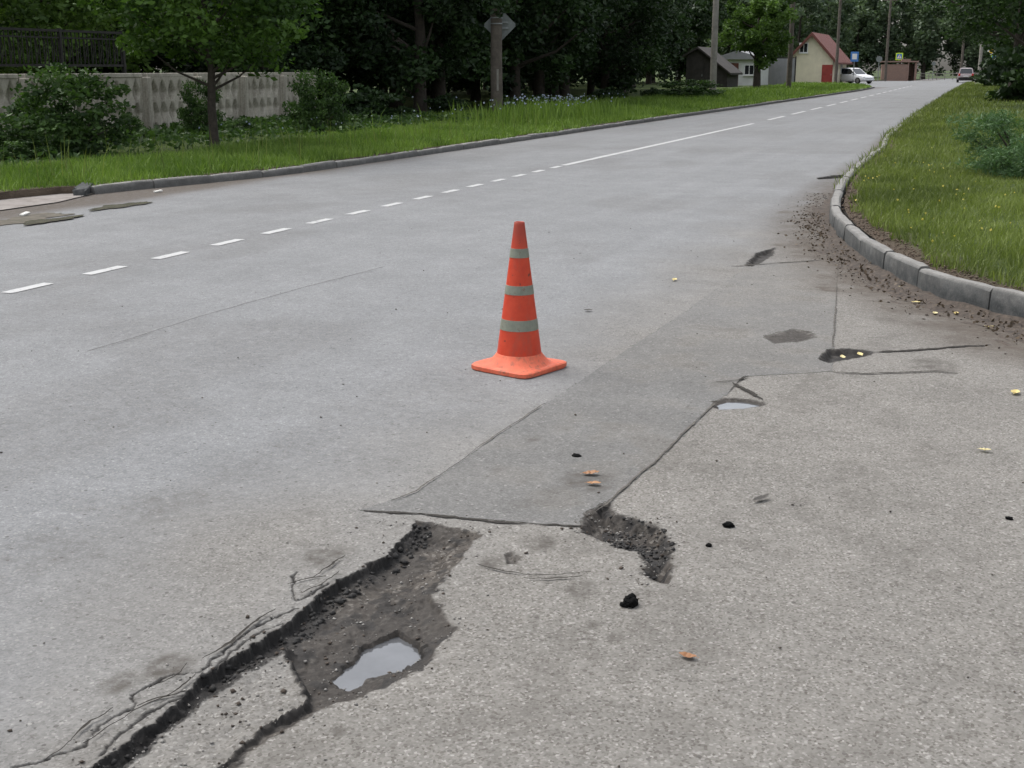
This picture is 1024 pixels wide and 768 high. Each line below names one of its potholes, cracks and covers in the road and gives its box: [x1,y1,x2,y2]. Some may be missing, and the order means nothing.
crack [718,375,763,400]
pothole [710,397,767,410]
pothole [93,520,485,768]
crack [11,555,346,768]
crack [879,344,991,352]
pothole [744,248,774,267]
crack [478,564,591,579]
pothole [818,348,873,363]
pothole [580,502,675,584]
